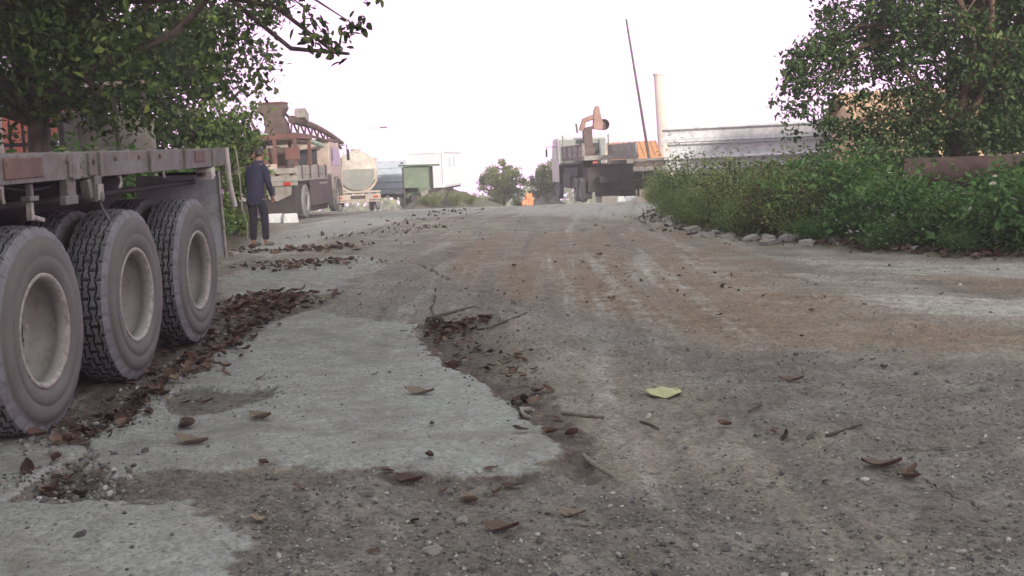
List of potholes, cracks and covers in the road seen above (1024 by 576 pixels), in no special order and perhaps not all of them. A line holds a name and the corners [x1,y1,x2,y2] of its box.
pothole [45,459,112,501]
pothole [160,383,285,417]
pothole [554,451,610,487]
pothole [418,315,546,413]
